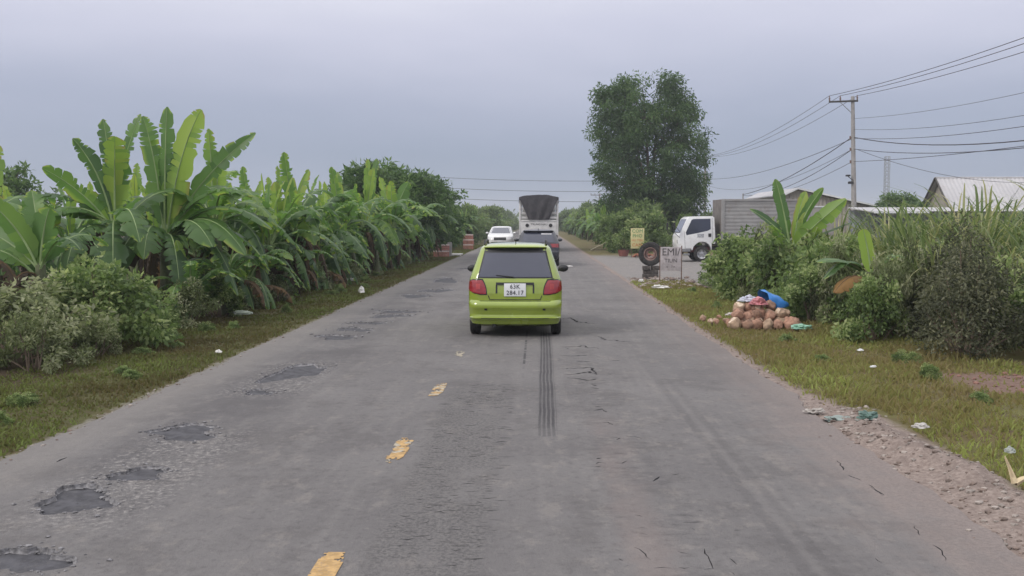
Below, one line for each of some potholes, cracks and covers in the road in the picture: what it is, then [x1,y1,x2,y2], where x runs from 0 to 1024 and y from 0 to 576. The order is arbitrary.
pothole [254,360,338,384]
pothole [69,463,178,486]
crack [620,510,740,575]
crack [837,461,946,563]
pothole [325,325,381,333]
pothole [138,420,228,447]
pothole [299,332,363,340]
pothole [232,387,291,397]
pothole [0,536,113,576]
pothole [11,477,134,517]
crack [560,318,639,439]
